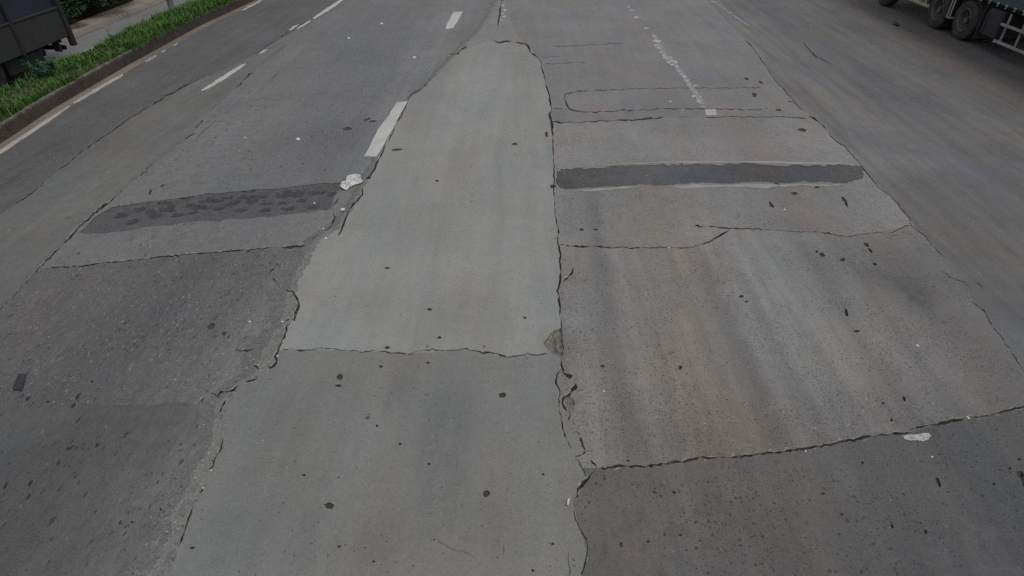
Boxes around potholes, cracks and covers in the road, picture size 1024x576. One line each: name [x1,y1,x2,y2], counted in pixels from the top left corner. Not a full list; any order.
crack [560,224,910,249]
crack [597,405,1024,470]
crack [51,46,546,547]
pothole [544,328,564,357]
